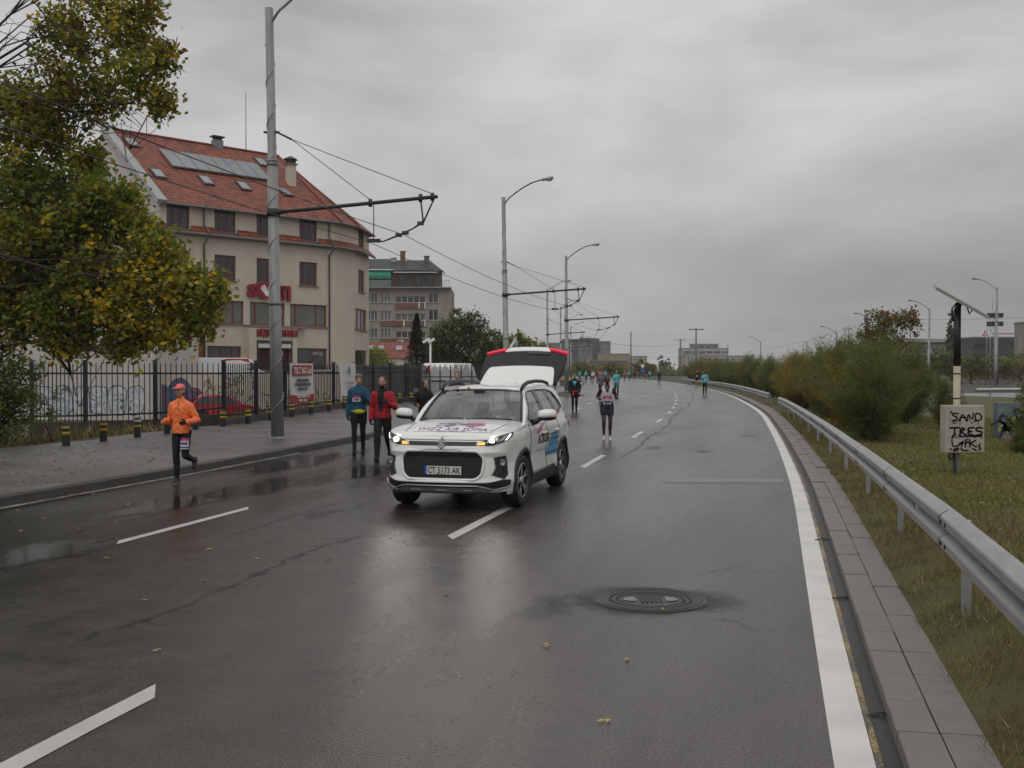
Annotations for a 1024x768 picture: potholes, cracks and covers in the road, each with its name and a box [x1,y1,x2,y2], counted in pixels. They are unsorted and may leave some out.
manhole cover [594,588,708,613]
